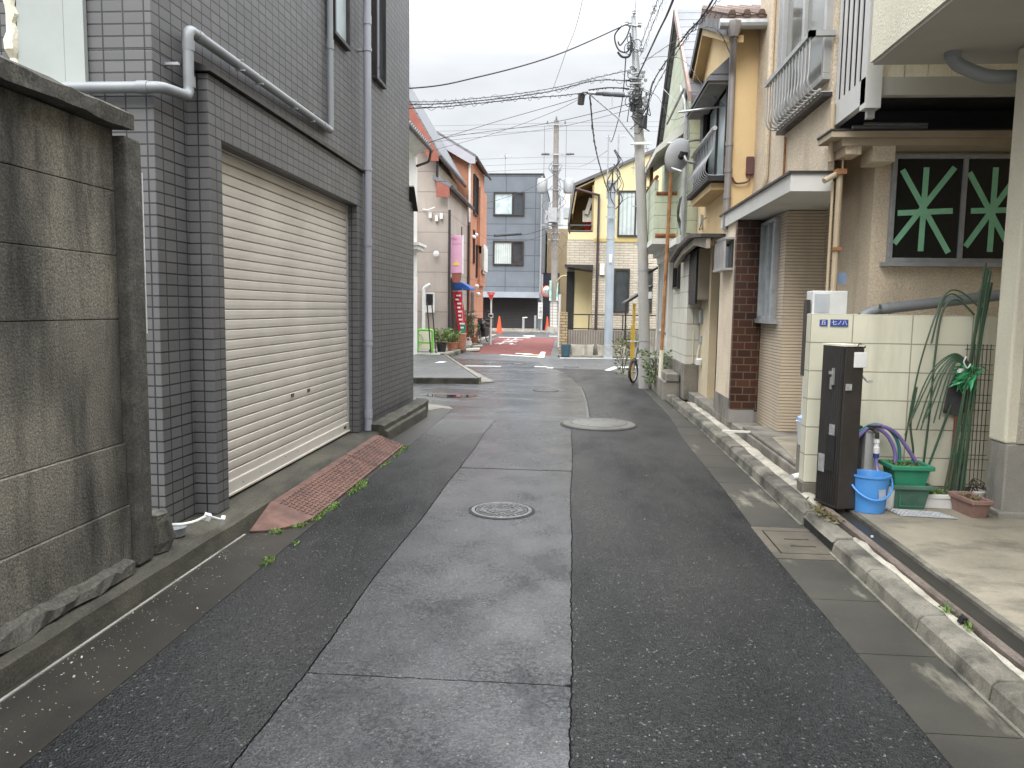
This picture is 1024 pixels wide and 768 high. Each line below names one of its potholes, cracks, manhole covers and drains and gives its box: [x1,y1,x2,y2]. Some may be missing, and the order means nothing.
manhole cover [560,418,638,431]
manhole cover [468,502,535,520]
